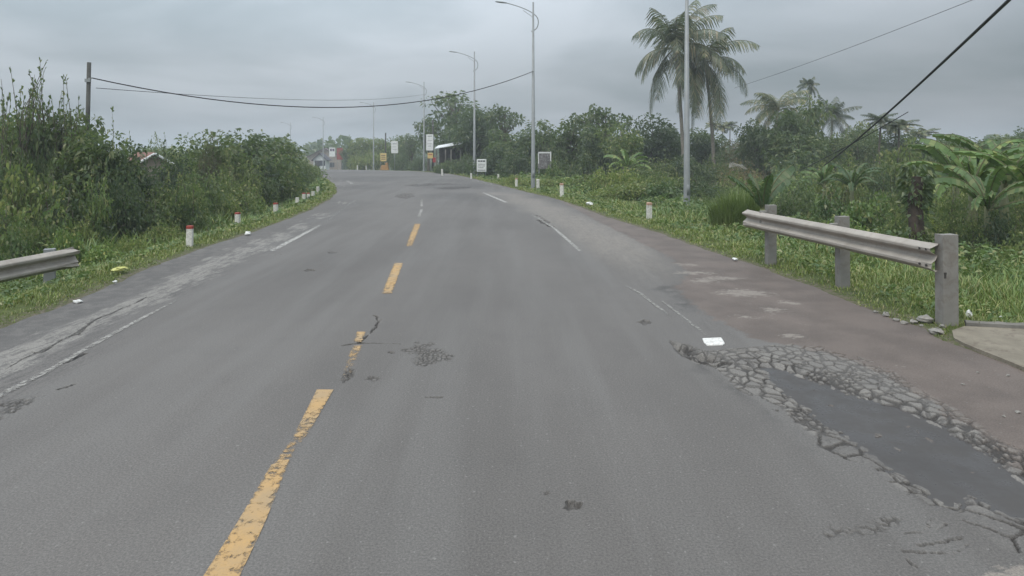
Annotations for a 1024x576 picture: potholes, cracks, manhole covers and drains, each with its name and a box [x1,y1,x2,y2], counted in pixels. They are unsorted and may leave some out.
crack [667,339,1024,571]
crack [336,311,457,385]
pothole [563,497,583,512]
crack [0,293,155,420]
